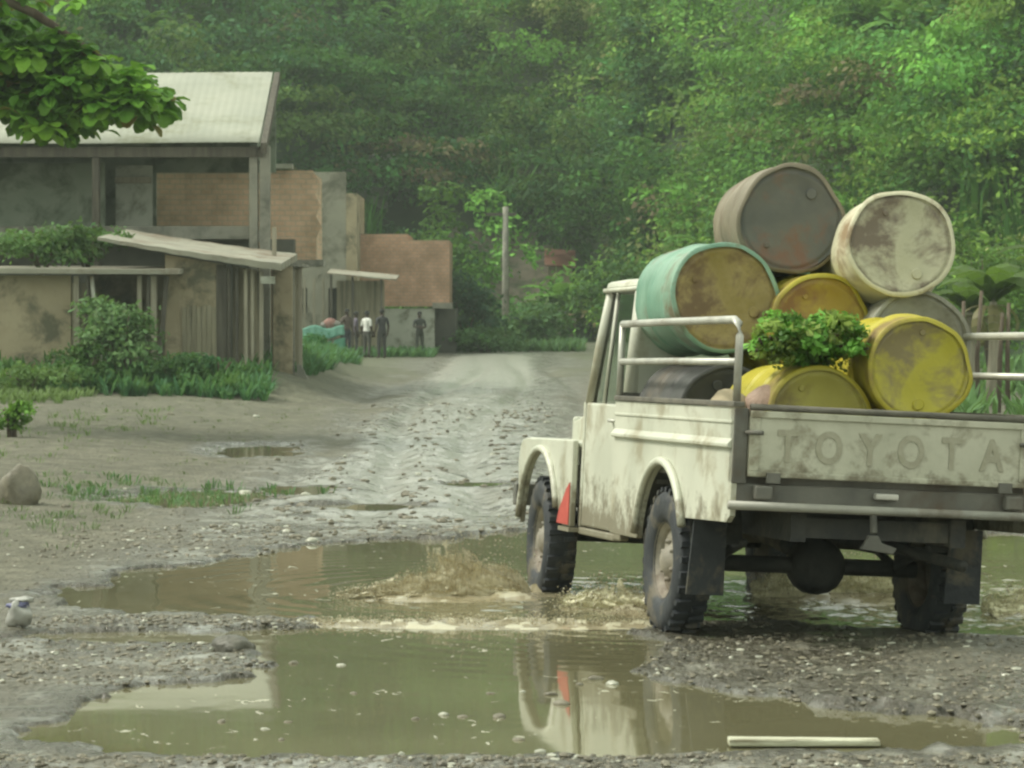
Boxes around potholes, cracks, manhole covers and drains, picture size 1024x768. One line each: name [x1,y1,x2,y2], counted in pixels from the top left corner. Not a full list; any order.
pothole [256,485,357,495]
pothole [24,527,1024,636]
pothole [0,622,1024,759]
pothole [193,441,322,458]
